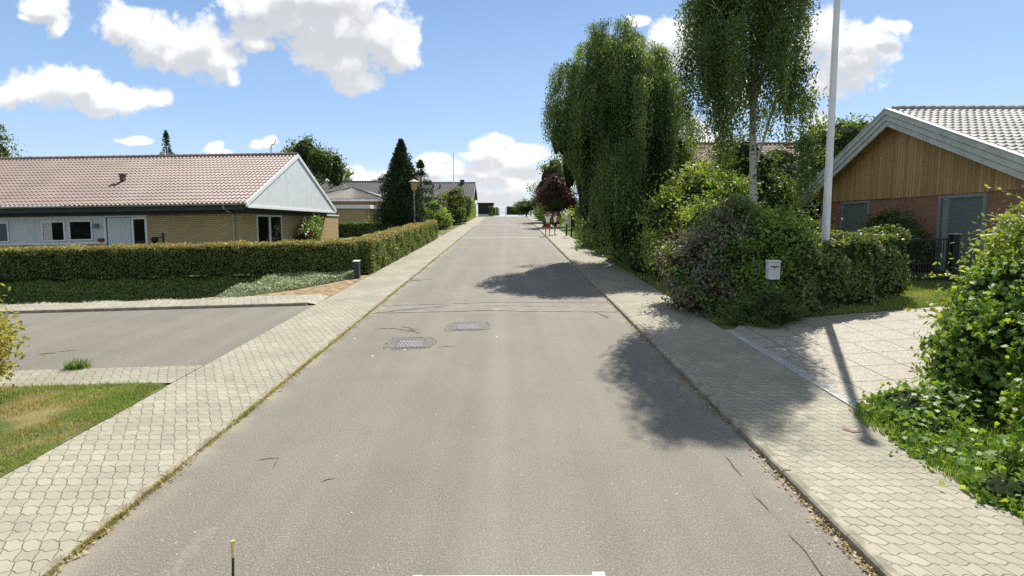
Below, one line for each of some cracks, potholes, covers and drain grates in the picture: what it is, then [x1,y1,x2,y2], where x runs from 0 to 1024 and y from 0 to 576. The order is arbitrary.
crack [370,302,570,350]
crack [727,458,824,576]
